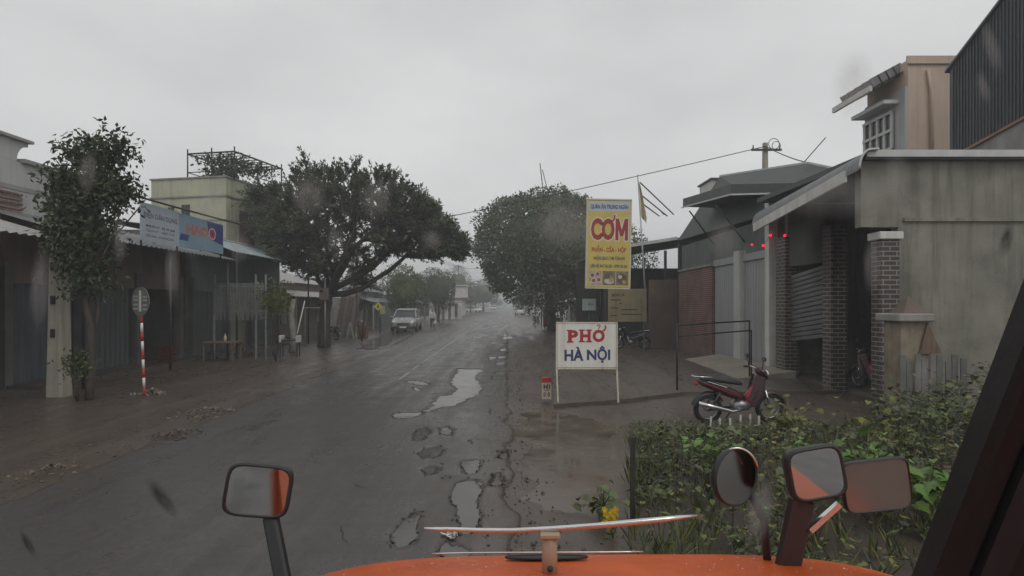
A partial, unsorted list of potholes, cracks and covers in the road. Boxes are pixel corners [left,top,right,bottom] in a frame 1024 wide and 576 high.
pothole [413,444,447,458]
pothole [420,465,443,476]
pothole [448,476,484,536]
pothole [385,512,425,547]
pothole [411,426,433,441]
pothole [418,368,486,413]
